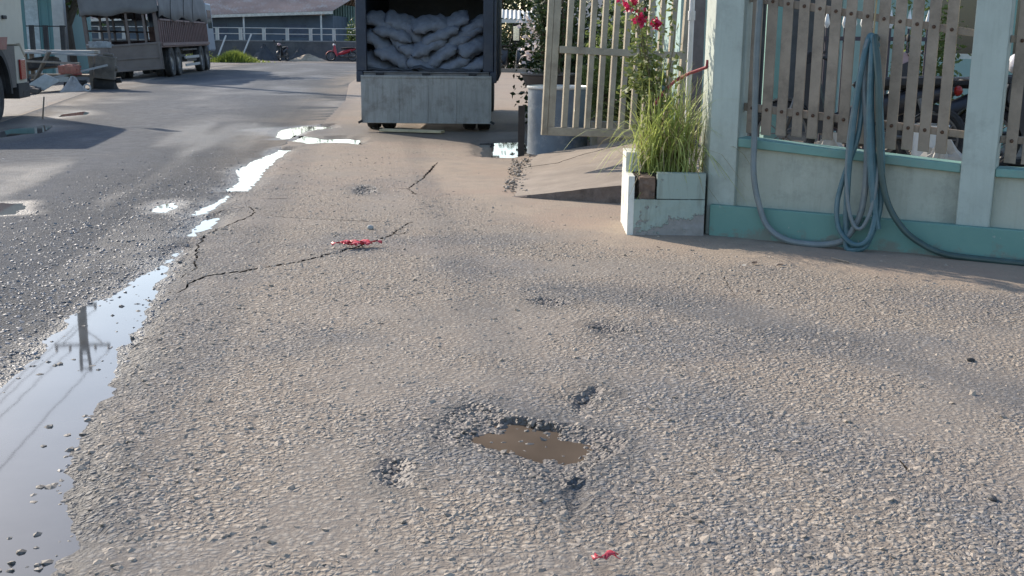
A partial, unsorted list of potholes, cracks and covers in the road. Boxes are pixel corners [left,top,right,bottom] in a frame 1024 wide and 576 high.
pothole [371,455,416,490]
pothole [350,185,377,195]
pothole [525,296,573,308]
pothole [583,322,635,335]
pothole [569,385,606,414]
pothole [425,401,630,488]
pothole [559,477,593,517]
crack [400,163,437,194]
crack [177,198,412,293]
